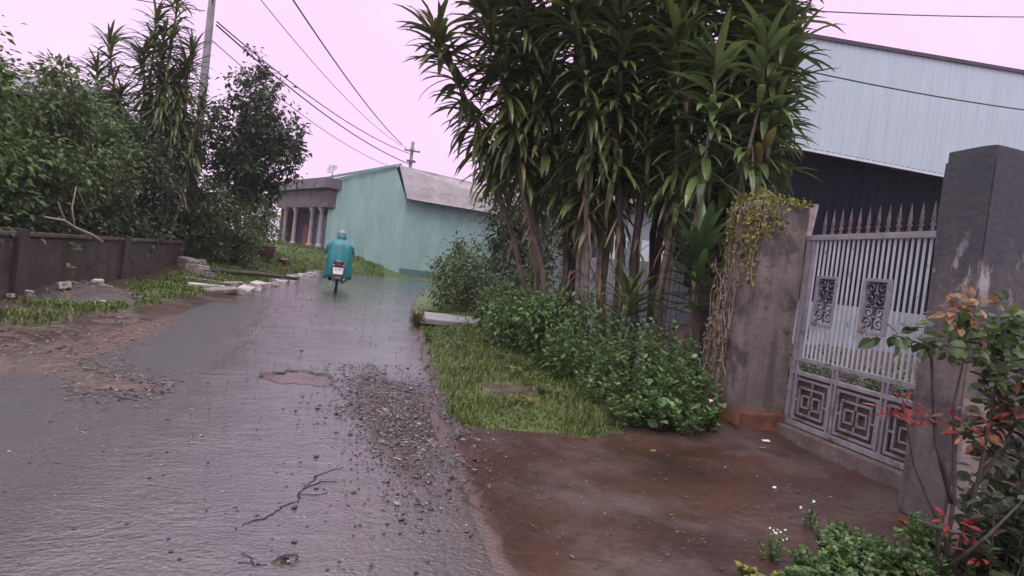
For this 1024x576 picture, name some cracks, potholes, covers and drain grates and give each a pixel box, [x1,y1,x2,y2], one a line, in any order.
crack [238,553,267,566]
pothole [271,553,300,569]
crack [242,467,344,526]
pothole [256,369,339,388]
